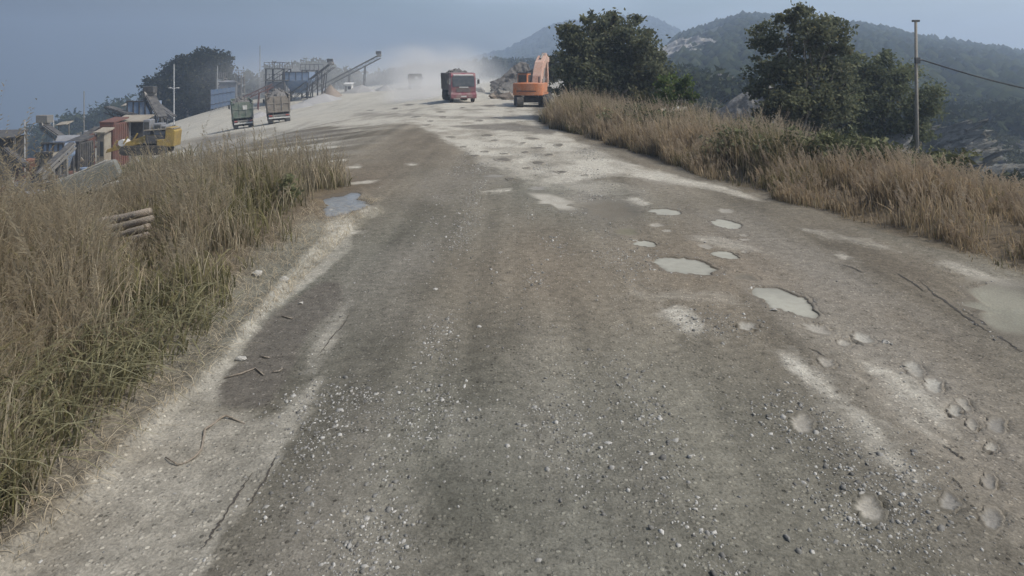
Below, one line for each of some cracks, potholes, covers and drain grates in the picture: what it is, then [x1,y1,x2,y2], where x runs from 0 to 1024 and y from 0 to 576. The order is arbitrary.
pothole [849,492,889,525]
pothole [983,415,1009,436]
pothole [920,376,945,396]
pothole [640,255,725,277]
pothole [631,239,659,248]
pothole [952,396,974,414]
pothole [946,276,1024,349]
pothole [643,208,685,216]
crack [201,453,278,549]
pothole [901,358,927,380]
pothole [742,283,825,325]
pothole [976,505,1006,533]
